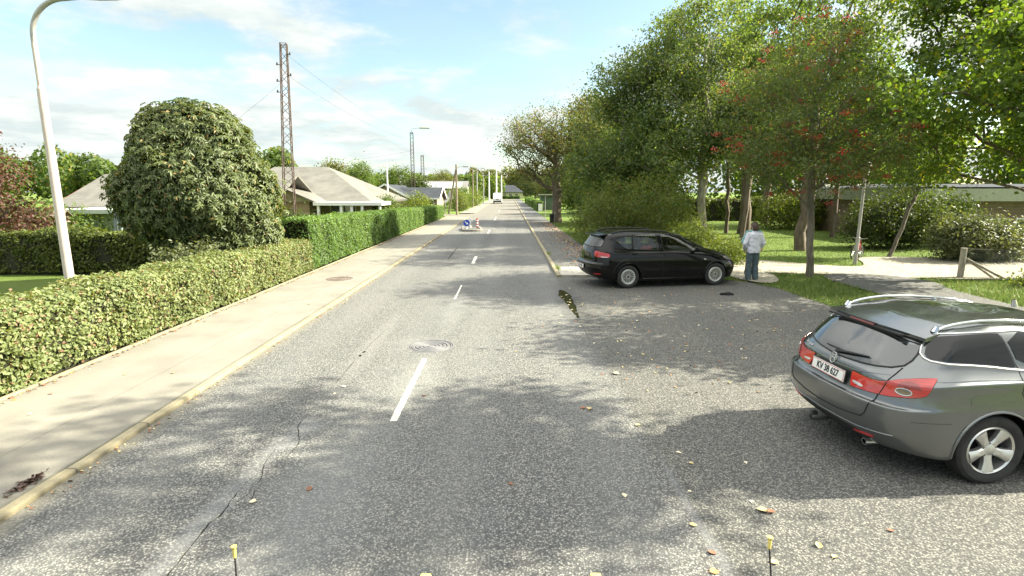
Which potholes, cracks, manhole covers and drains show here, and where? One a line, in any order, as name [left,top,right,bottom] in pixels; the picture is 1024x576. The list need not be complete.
crack [166,415,318,576]
manhole cover [408,339,454,353]
